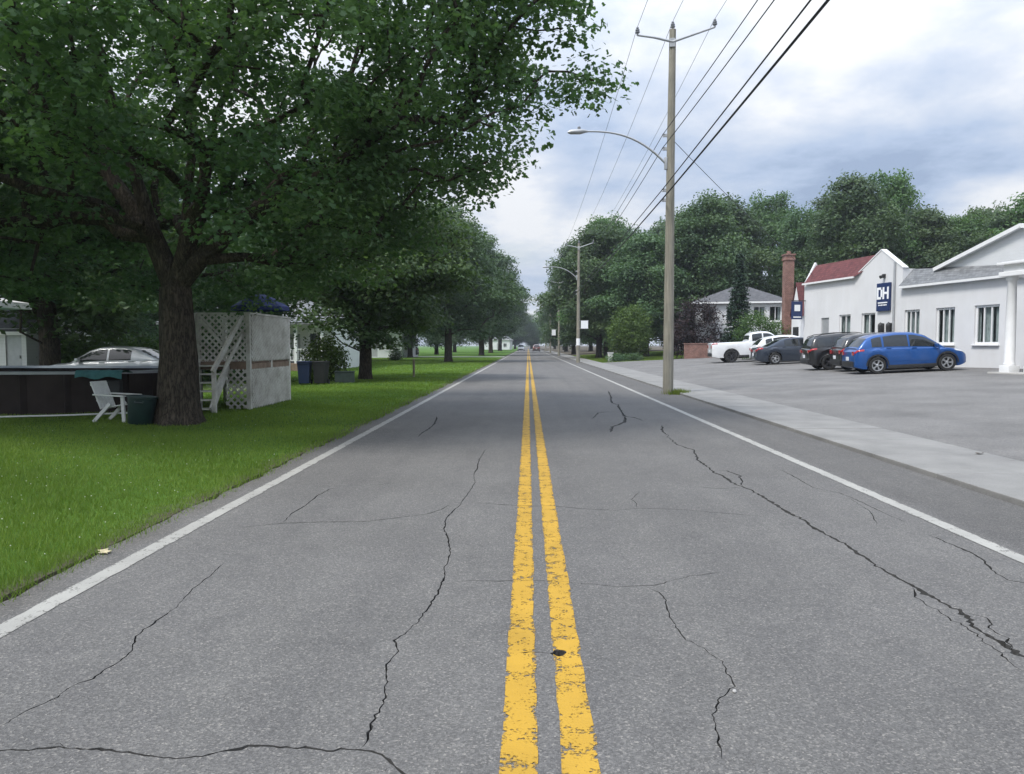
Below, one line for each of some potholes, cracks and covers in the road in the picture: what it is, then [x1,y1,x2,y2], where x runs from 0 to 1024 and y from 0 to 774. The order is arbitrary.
crack [0,426,1024,774]
crack [593,391,641,432]
